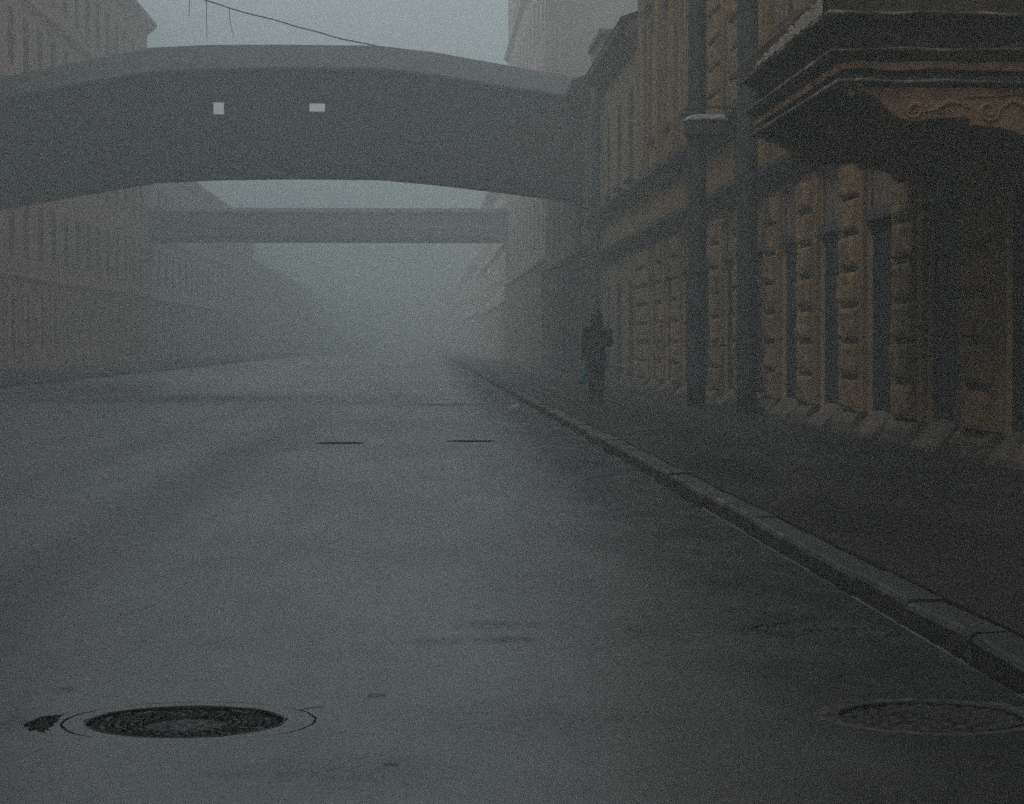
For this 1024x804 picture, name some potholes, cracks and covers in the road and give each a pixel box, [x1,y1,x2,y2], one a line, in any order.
manhole cover [83,705,288,738]
manhole cover [815,698,1024,736]
pothole [23,714,64,733]
